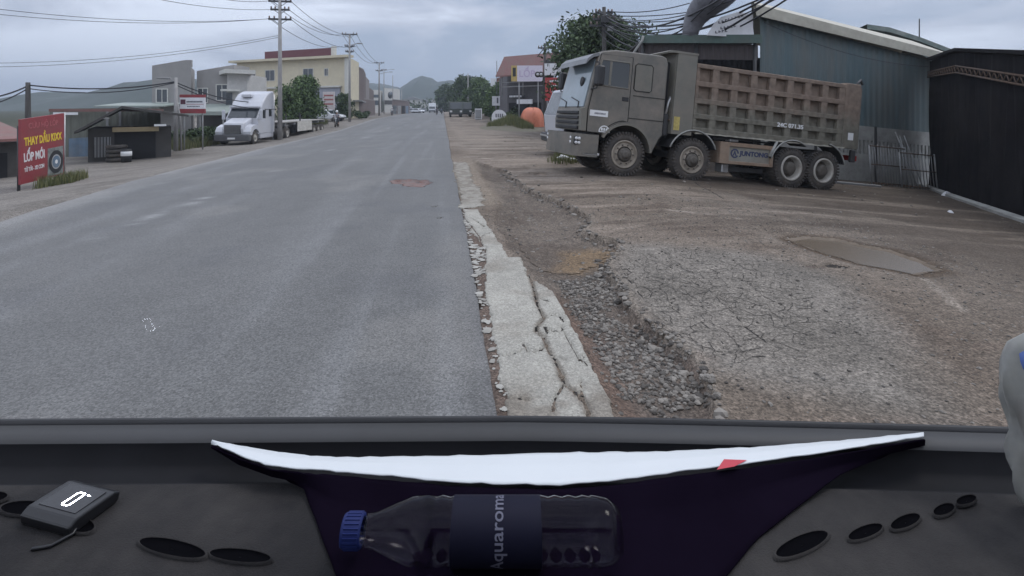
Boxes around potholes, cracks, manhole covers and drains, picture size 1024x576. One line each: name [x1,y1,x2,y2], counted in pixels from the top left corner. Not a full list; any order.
crack [610,250,813,363]
crack [514,276,588,402]
